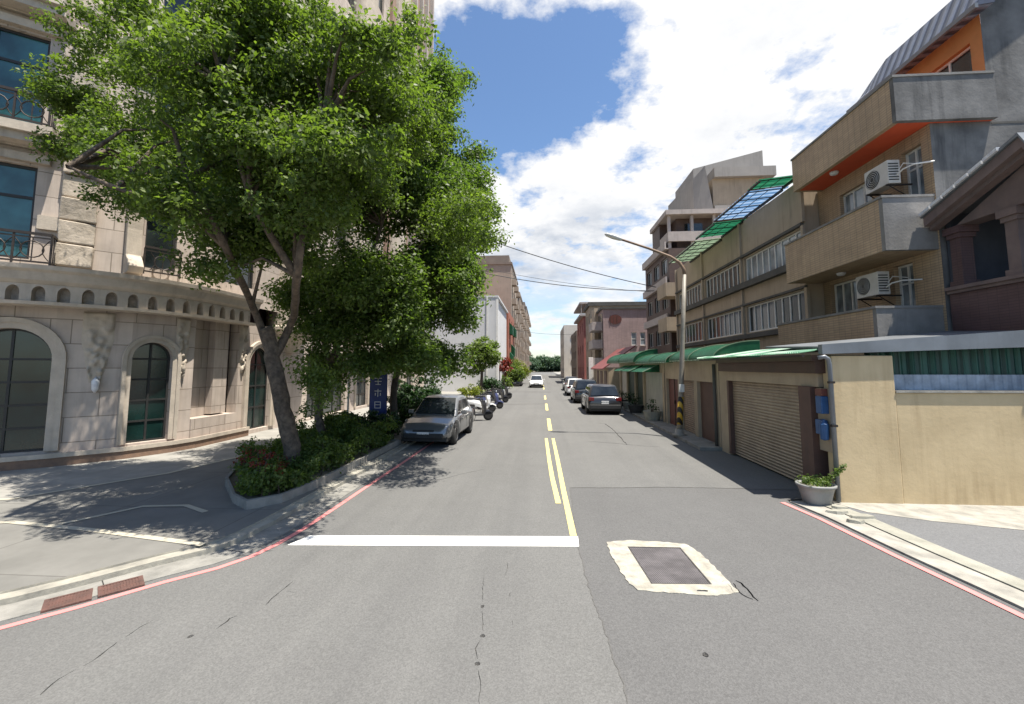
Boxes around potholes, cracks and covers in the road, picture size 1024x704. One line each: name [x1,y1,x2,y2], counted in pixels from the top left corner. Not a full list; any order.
crack [475,580,484,696]
manhole cover [607,540,739,596]
crack [733,581,758,601]
crack [40,618,156,695]
